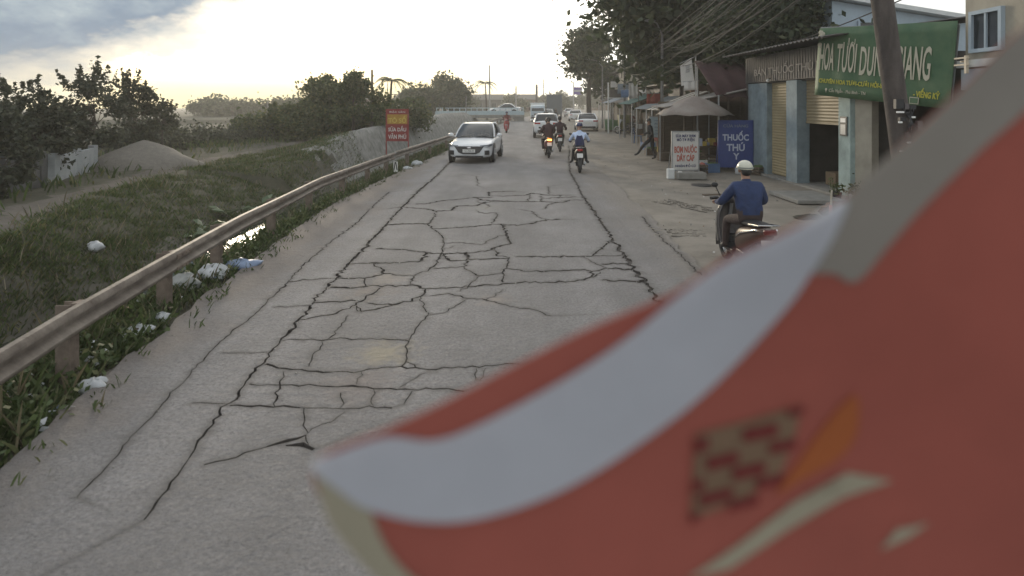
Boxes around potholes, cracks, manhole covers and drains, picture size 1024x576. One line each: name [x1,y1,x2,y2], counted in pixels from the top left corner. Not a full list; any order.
crack [76,192,641,498]
crack [406,176,570,211]
crack [642,217,702,275]
